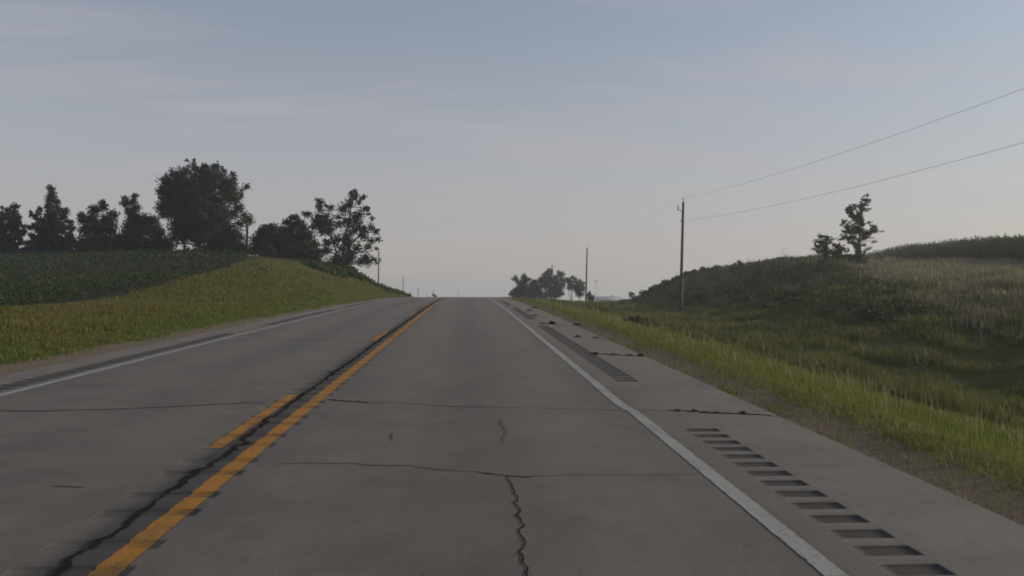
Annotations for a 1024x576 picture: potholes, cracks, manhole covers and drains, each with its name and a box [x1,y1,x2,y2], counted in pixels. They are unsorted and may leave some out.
crack [280,463,680,576]
